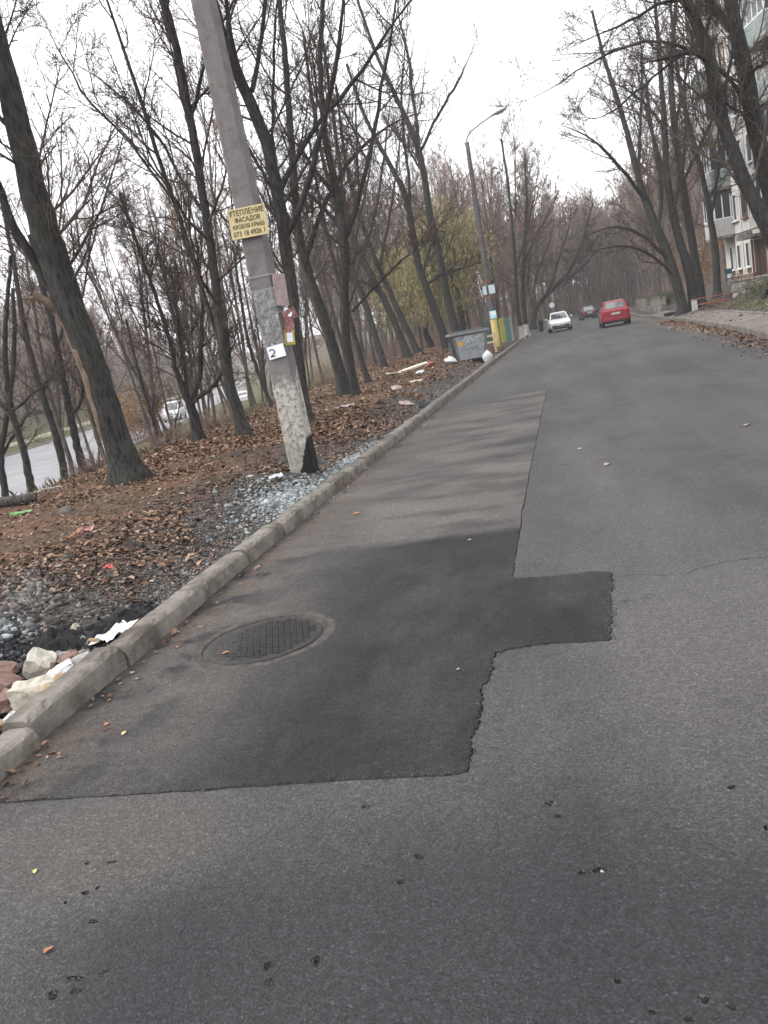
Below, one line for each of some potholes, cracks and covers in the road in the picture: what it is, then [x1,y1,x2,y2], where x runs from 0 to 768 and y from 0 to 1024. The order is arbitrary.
crack [494,556,768,653]
manhole cover [192,612,336,670]
